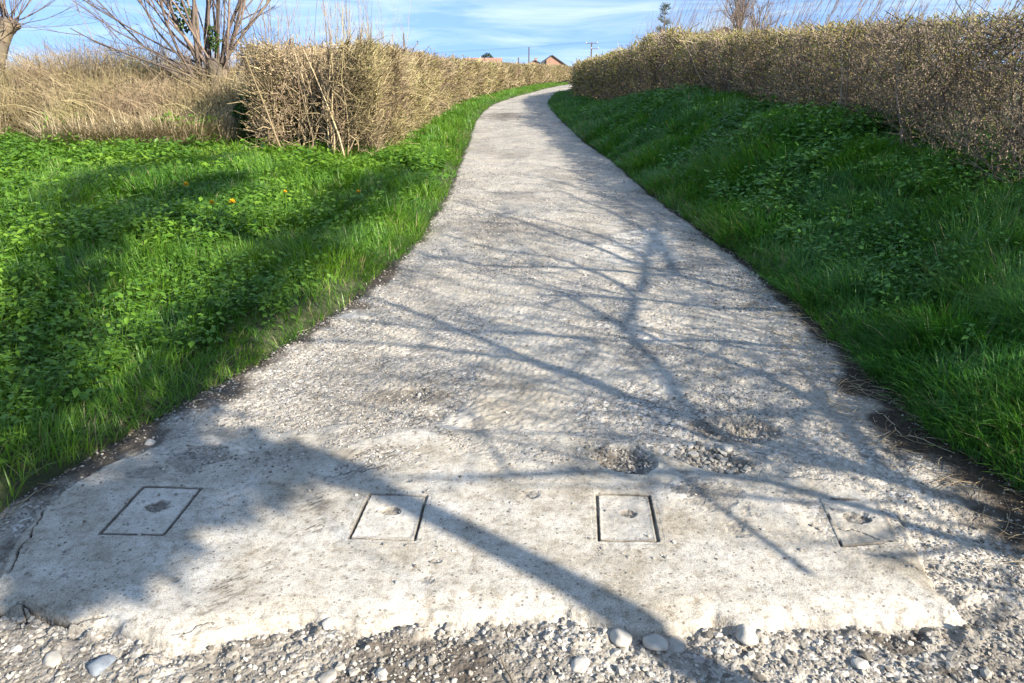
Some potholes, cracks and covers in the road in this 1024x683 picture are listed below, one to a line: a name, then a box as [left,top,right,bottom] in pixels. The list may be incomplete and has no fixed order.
pothole [664,440,765,479]
manhole cover [93,484,207,538]
manhole cover [815,496,906,550]
pothole [679,412,796,449]
manhole cover [591,490,664,545]
pothole [577,441,665,478]
manhole cover [343,491,432,543]
crack [2,506,52,577]
